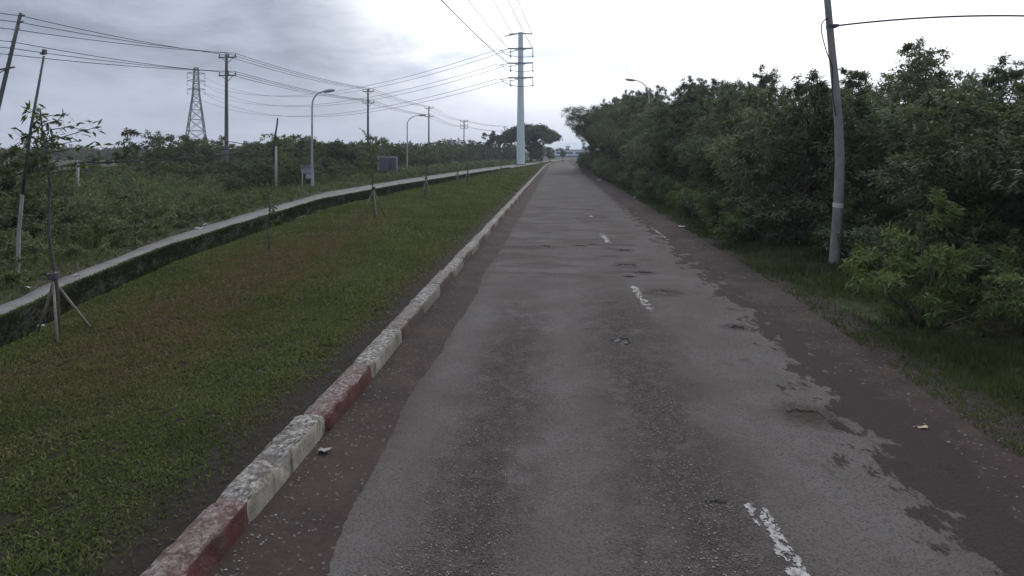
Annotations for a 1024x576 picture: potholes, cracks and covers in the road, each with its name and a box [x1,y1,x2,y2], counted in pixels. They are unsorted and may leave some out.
pothole [786,409,827,423]
